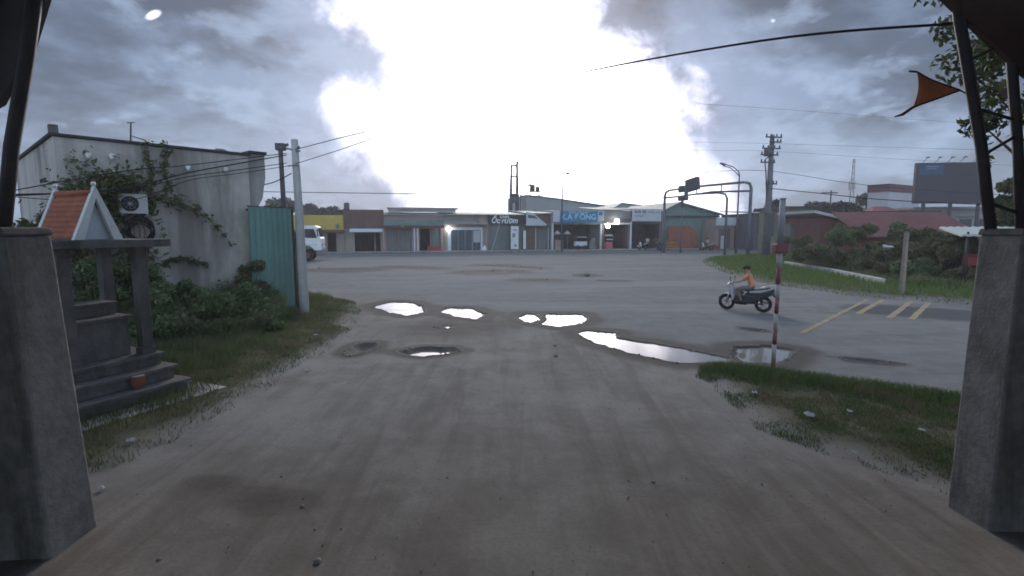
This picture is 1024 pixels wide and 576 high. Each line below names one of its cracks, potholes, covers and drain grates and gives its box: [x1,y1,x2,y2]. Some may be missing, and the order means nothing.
pothole [574,330,733,364]
pothole [438,306,491,319]
pothole [394,346,466,357]
pothole [369,300,427,316]
pothole [341,341,381,356]
pothole [726,344,802,365]
pothole [515,312,544,323]
pothole [536,313,591,327]
